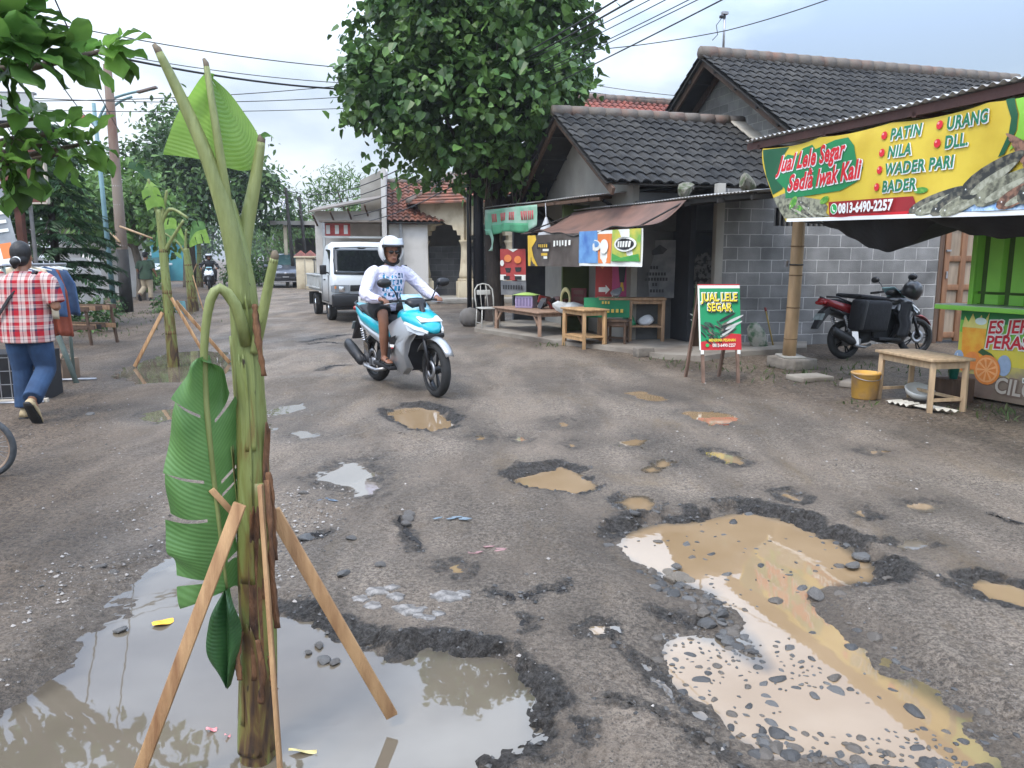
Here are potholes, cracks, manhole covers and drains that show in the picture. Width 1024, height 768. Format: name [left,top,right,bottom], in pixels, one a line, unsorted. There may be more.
pothole [551,490,1024,768]
pothole [677,441,782,474]
pothole [0,541,619,768]
pothole [270,420,353,446]
pothole [266,398,339,421]
pothole [628,453,701,473]
pothole [621,463,681,480]
pothole [479,454,632,503]
pothole [741,481,837,509]
